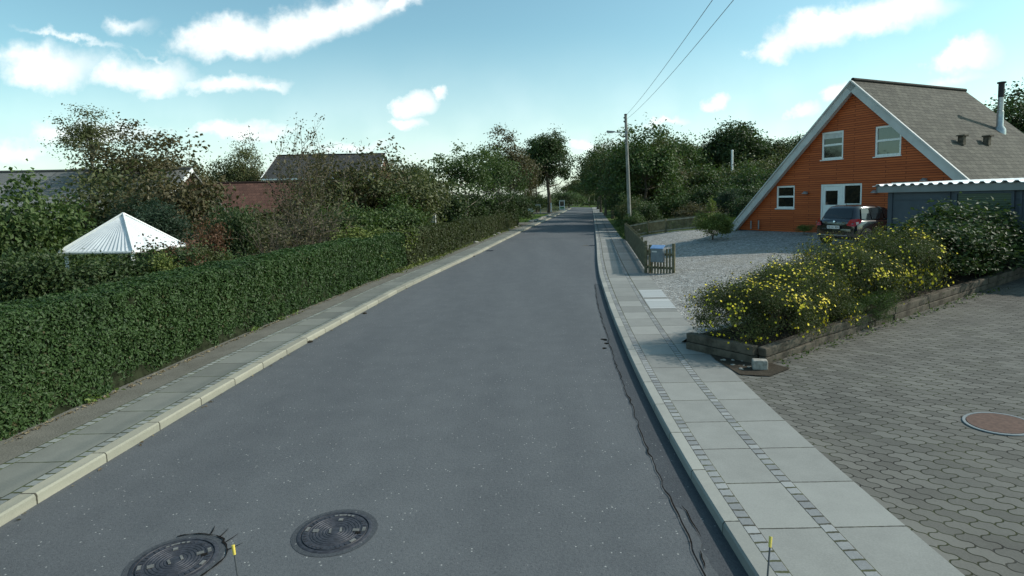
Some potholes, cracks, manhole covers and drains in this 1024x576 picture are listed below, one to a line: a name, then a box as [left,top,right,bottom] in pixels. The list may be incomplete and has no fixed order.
manhole cover [962,412,1024,436]
manhole cover [291,509,378,557]
manhole cover [121,535,225,576]
